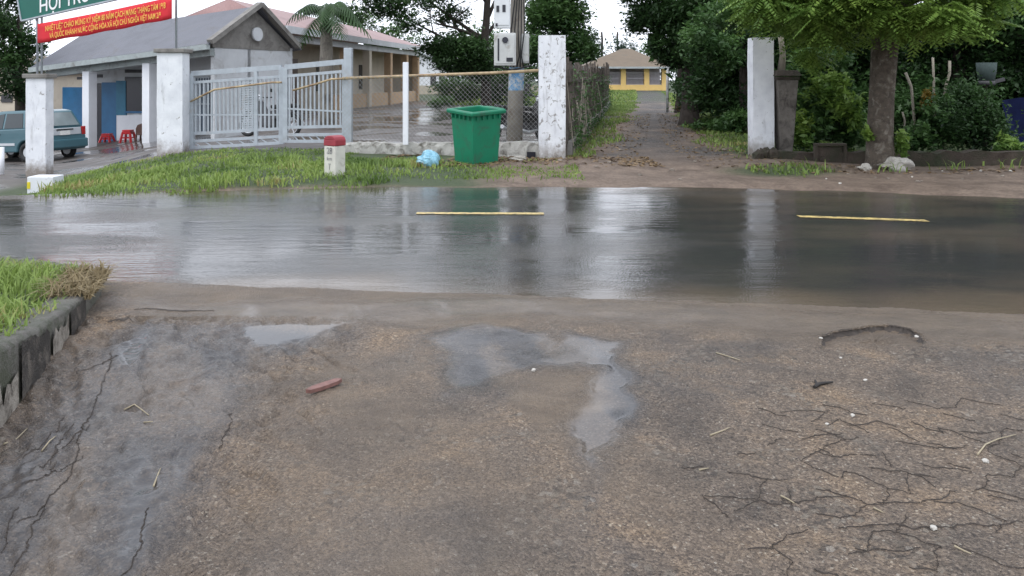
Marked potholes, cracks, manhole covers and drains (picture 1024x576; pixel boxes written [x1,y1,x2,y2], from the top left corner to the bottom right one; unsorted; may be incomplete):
crack [684,398,1024,576]
crack [108,308,214,322]
crack [1,353,233,576]
